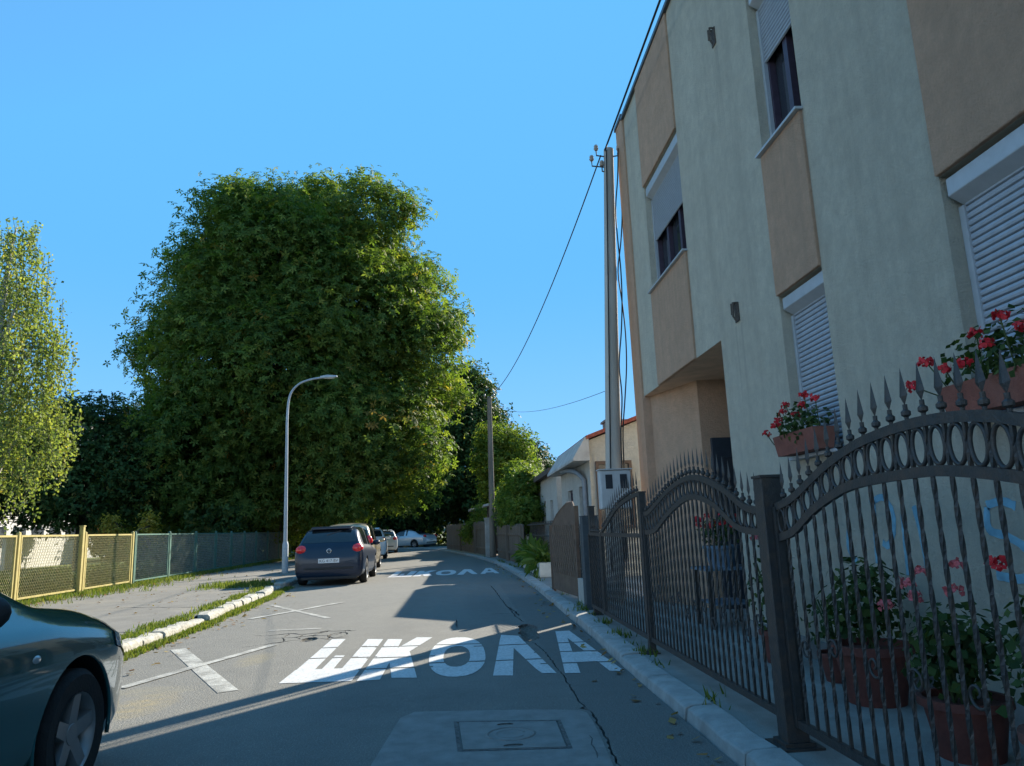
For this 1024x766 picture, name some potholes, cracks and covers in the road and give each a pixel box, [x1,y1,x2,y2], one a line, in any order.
crack [248,630,351,647]
pothole [518,624,540,643]
manhole cover [454,720,572,751]
